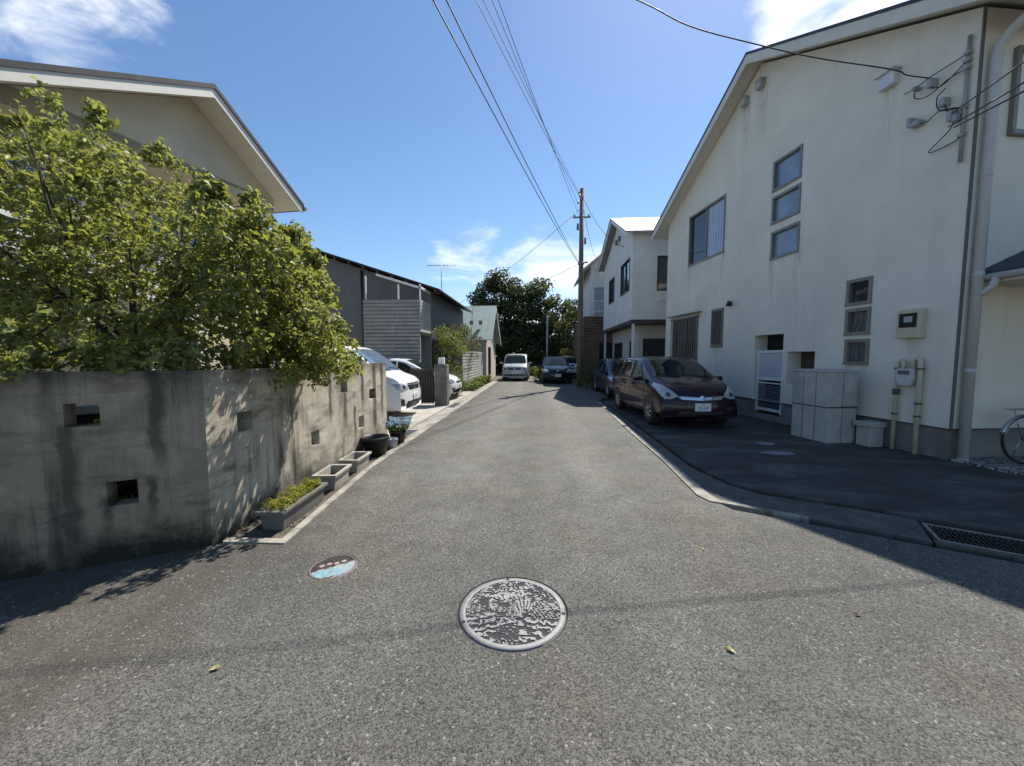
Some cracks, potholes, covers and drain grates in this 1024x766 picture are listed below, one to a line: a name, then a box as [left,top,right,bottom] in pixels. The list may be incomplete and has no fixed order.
manhole cover [457,578,568,653]
drain grate [921,522,1024,556]
manhole cover [307,555,358,580]
